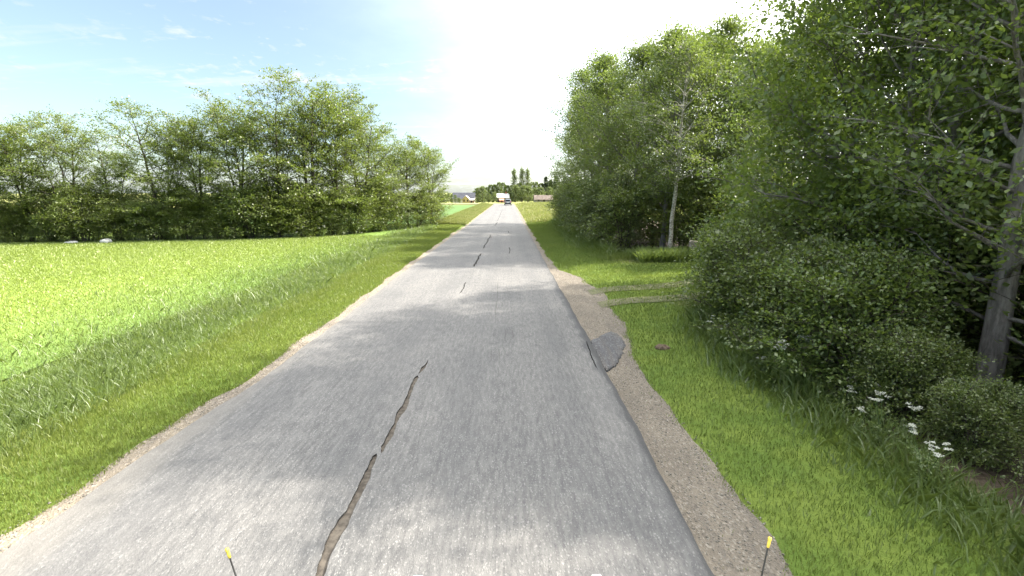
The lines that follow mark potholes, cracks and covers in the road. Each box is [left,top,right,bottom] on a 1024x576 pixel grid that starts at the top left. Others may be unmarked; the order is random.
crack [316,361,428,576]
